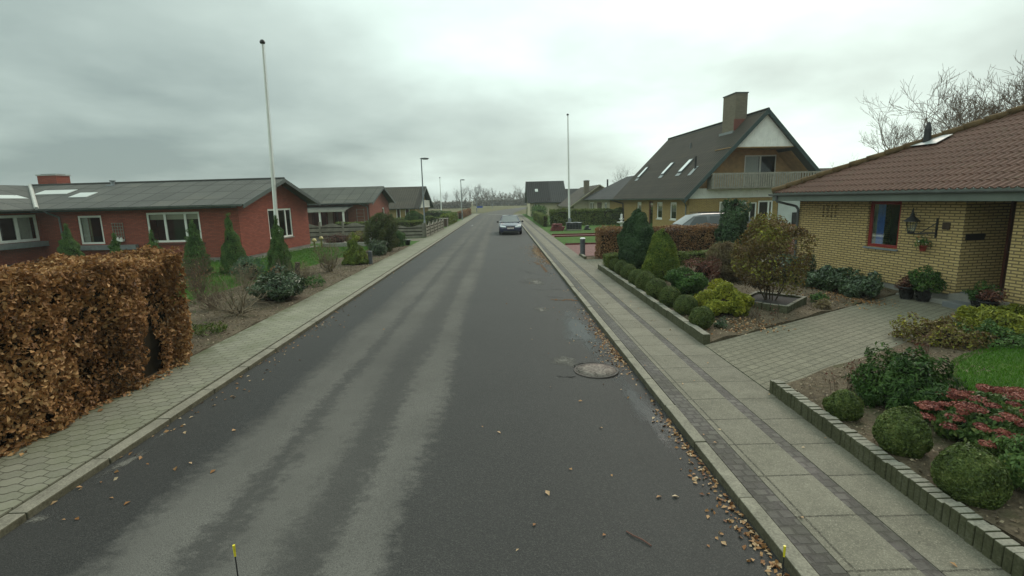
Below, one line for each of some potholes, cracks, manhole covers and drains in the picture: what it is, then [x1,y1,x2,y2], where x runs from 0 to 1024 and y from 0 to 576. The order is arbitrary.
manhole cover [574,363,619,379]
